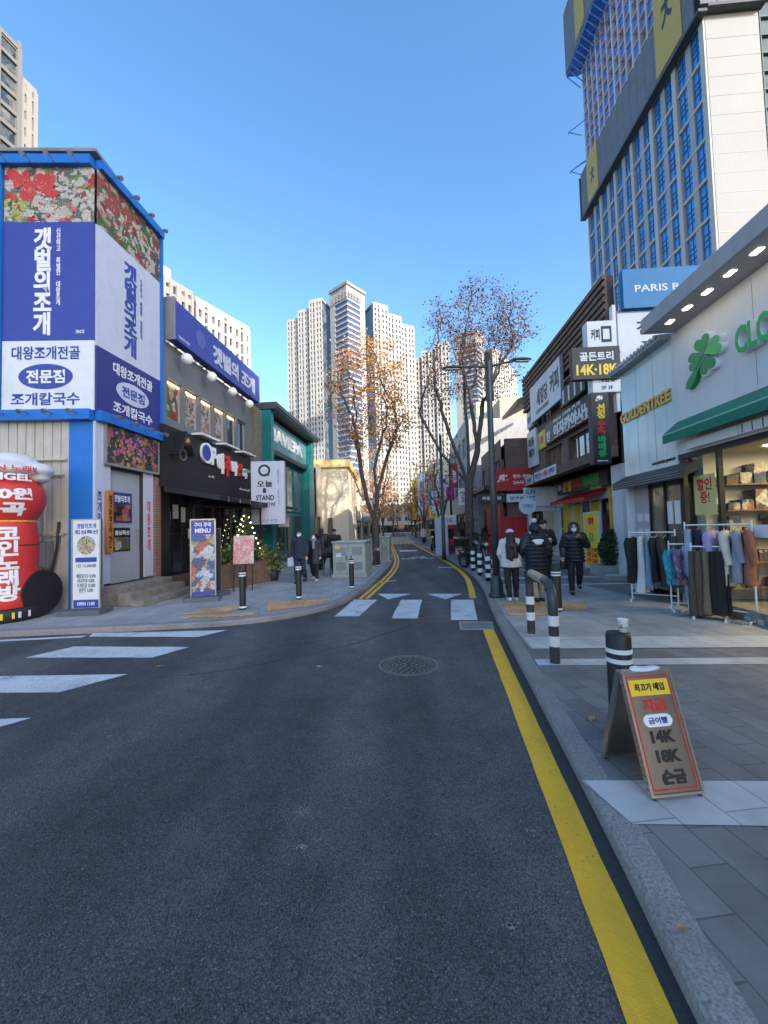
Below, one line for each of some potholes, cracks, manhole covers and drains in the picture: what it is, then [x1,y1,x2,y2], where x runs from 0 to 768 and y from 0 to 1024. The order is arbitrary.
drain grate [458,621,494,630]
manhole cover [378,655,439,676]
